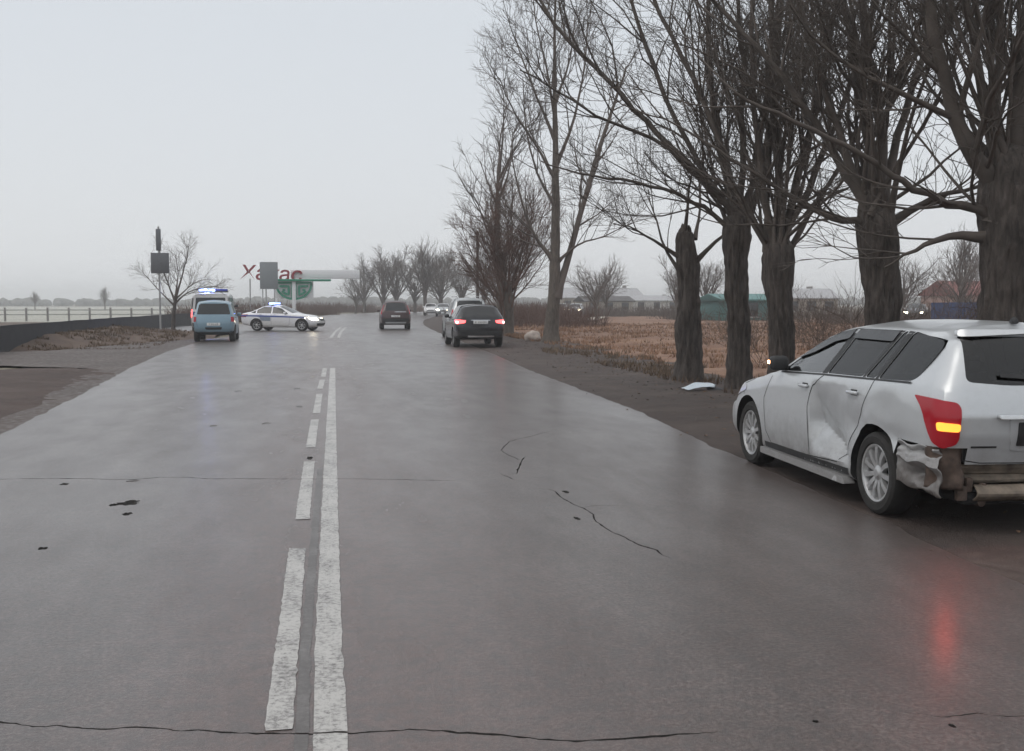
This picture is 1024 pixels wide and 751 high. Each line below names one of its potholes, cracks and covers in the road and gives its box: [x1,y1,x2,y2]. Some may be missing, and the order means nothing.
crack [0,721,715,742]
crack [550,489,667,557]
crack [500,432,545,480]
